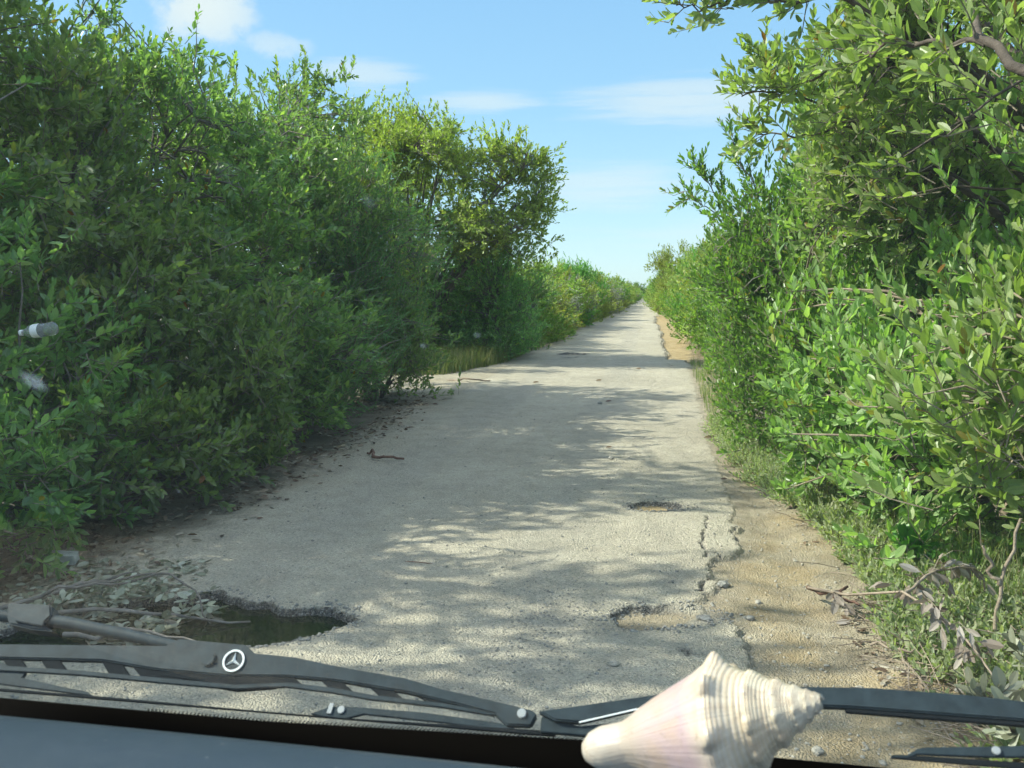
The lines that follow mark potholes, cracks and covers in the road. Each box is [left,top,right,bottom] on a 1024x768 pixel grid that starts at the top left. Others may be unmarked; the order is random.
pothole [0,589,361,647]
pothole [626,501,688,513]
pothole [606,602,731,631]
crack [688,507,740,561]
crack [695,579,710,591]
